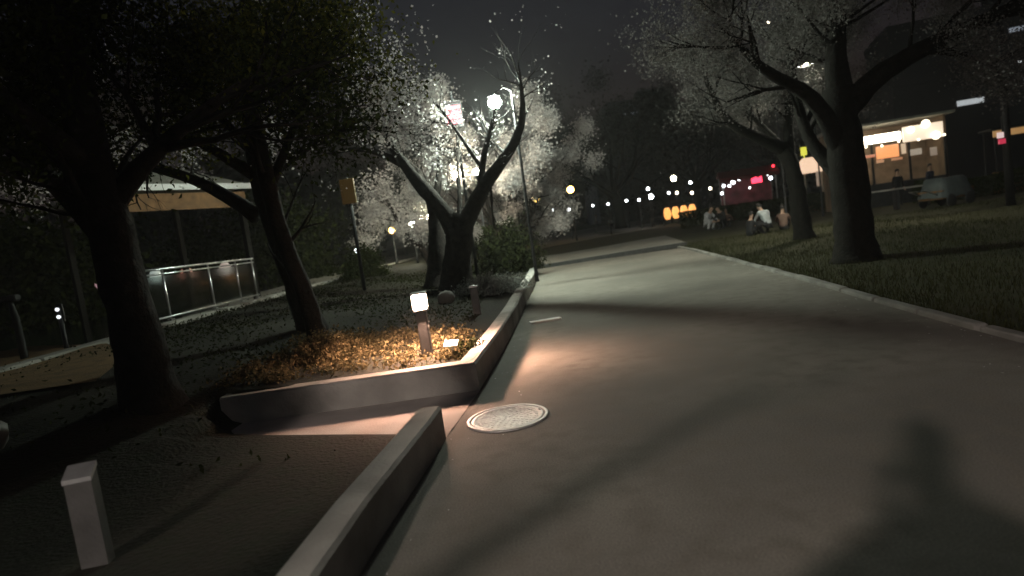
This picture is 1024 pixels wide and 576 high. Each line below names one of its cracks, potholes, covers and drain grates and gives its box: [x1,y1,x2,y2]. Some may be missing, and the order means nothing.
manhole cover [467,404,549,433]
